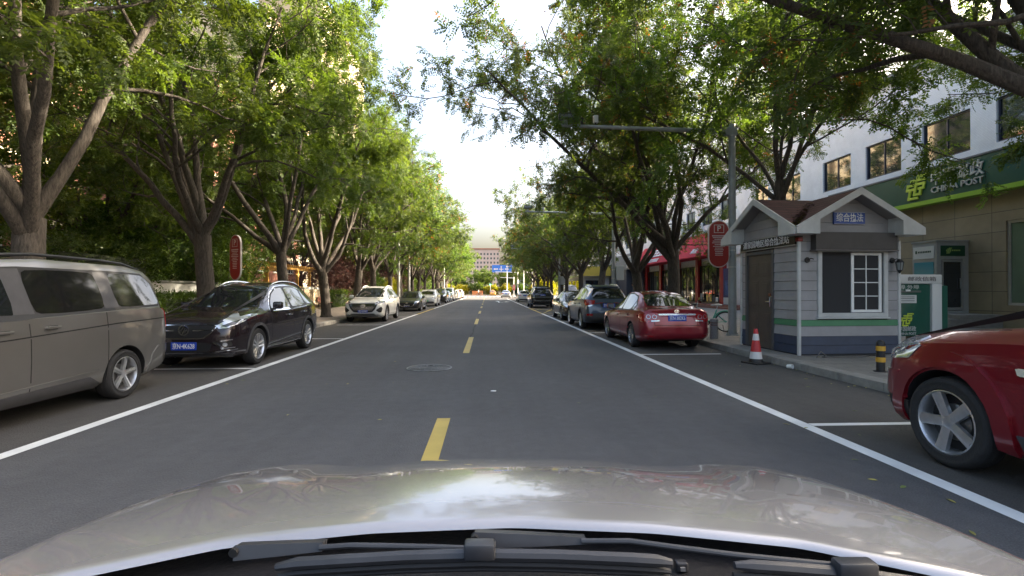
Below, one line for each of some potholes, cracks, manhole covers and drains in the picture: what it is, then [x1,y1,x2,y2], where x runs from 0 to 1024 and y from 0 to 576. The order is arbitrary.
manhole cover [406,364,452,372]
